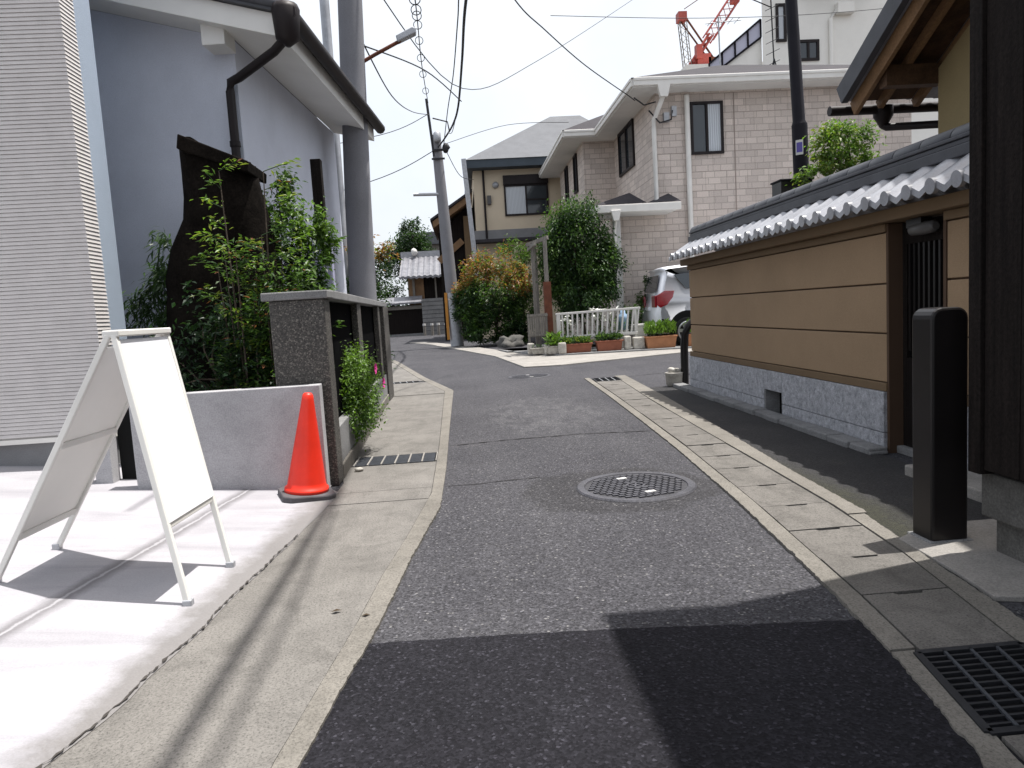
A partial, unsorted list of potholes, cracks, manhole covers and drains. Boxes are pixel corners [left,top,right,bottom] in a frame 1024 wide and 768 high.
drain grate [913,640,1024,738]
manhole cover [576,471,697,502]
drain grate [353,452,438,467]
